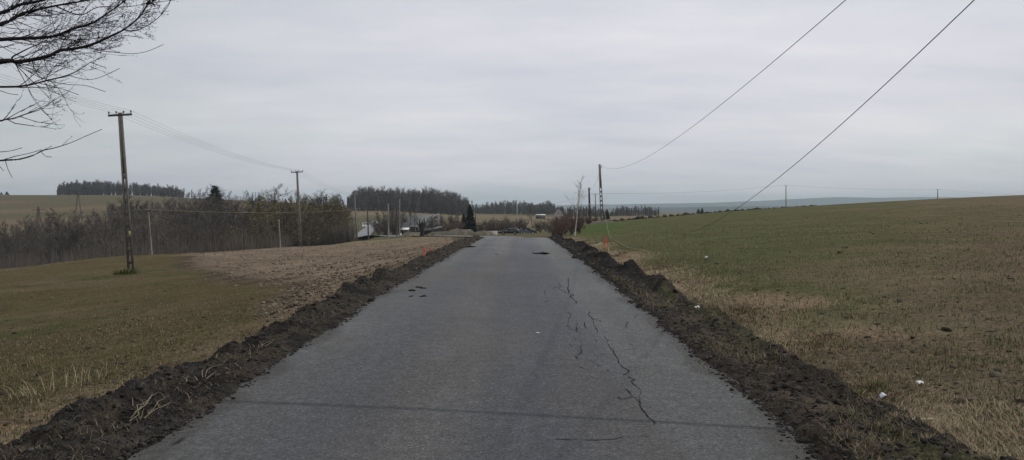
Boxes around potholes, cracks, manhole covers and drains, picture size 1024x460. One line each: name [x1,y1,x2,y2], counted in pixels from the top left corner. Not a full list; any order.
crack [544,278,655,424]
